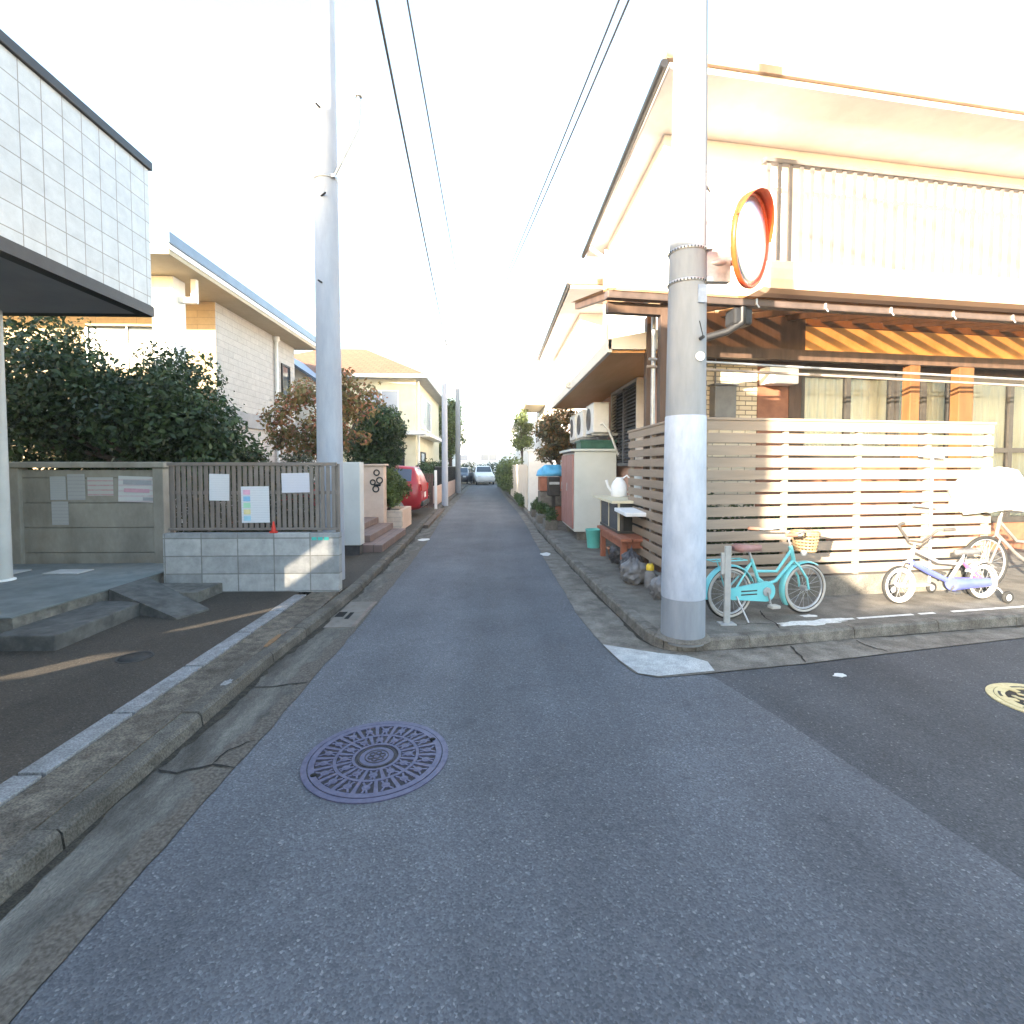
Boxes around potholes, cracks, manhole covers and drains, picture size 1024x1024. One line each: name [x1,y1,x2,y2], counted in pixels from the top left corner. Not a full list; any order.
crack [158,740,253,774]
manhole cover [115,651,154,664]
manhole cover [985,683,1024,713]
drain grate [323,601,377,628]
manhole cover [300,721,448,804]
